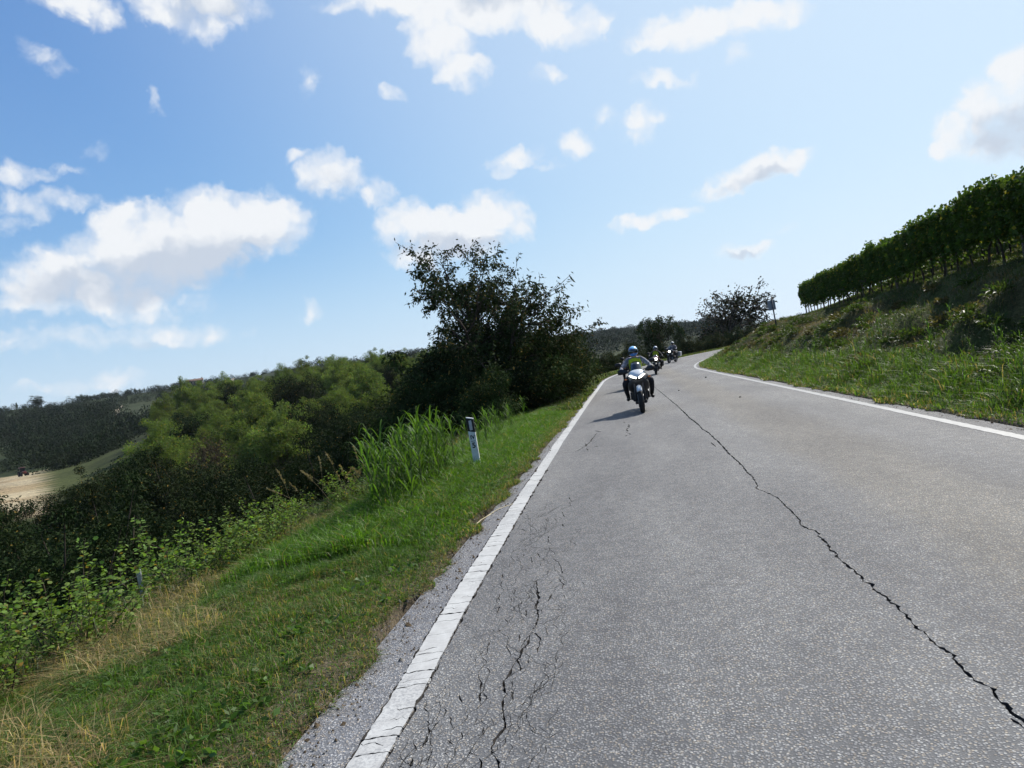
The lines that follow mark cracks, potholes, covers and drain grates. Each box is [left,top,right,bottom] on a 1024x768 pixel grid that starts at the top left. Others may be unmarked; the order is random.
crack [662,393,1024,728]
crack [344,467,587,768]
